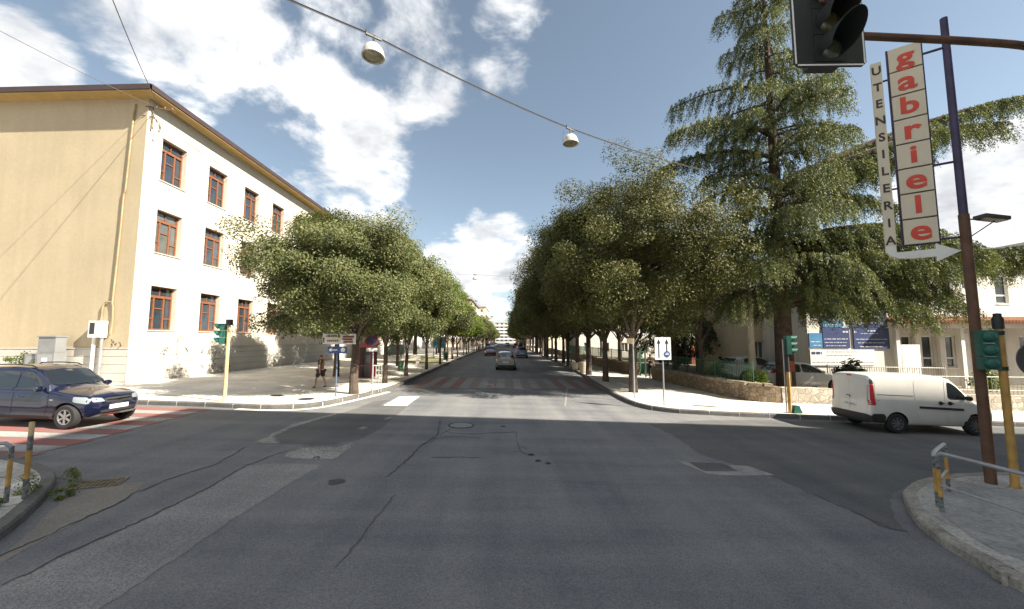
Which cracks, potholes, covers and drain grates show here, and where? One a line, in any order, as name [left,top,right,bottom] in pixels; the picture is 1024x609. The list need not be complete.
crack [385,420,525,477]
drain grate [63,477,130,491]
crack [334,495,395,569]
manhole cover [675,460,773,476]
crack [0,447,245,556]
